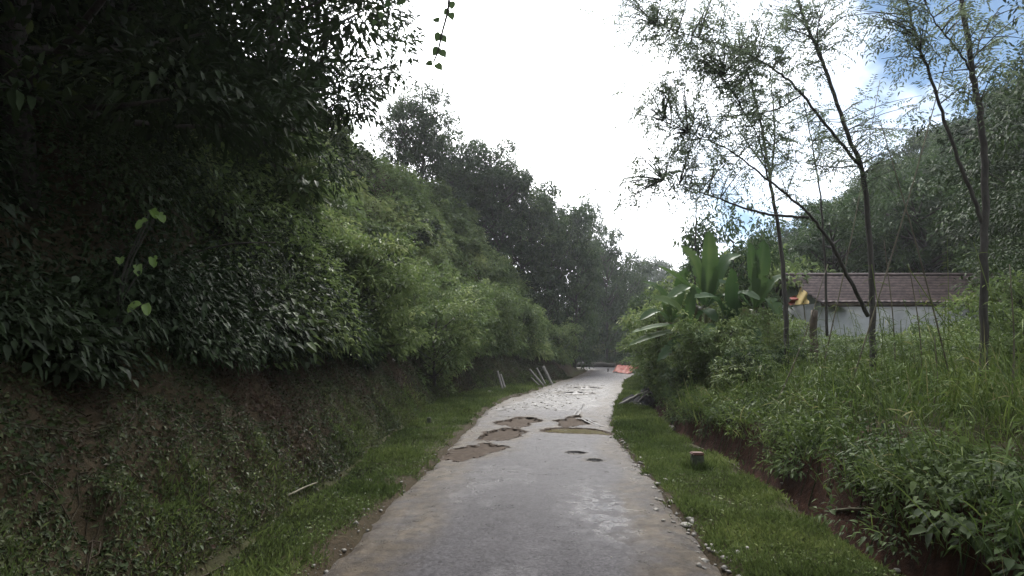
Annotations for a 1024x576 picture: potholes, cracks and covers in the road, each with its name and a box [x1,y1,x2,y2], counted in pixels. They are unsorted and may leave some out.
pothole [476,427,528,441]
pothole [494,416,542,429]
pothole [552,414,596,427]
pothole [540,427,614,436]
pothole [439,442,510,462]
